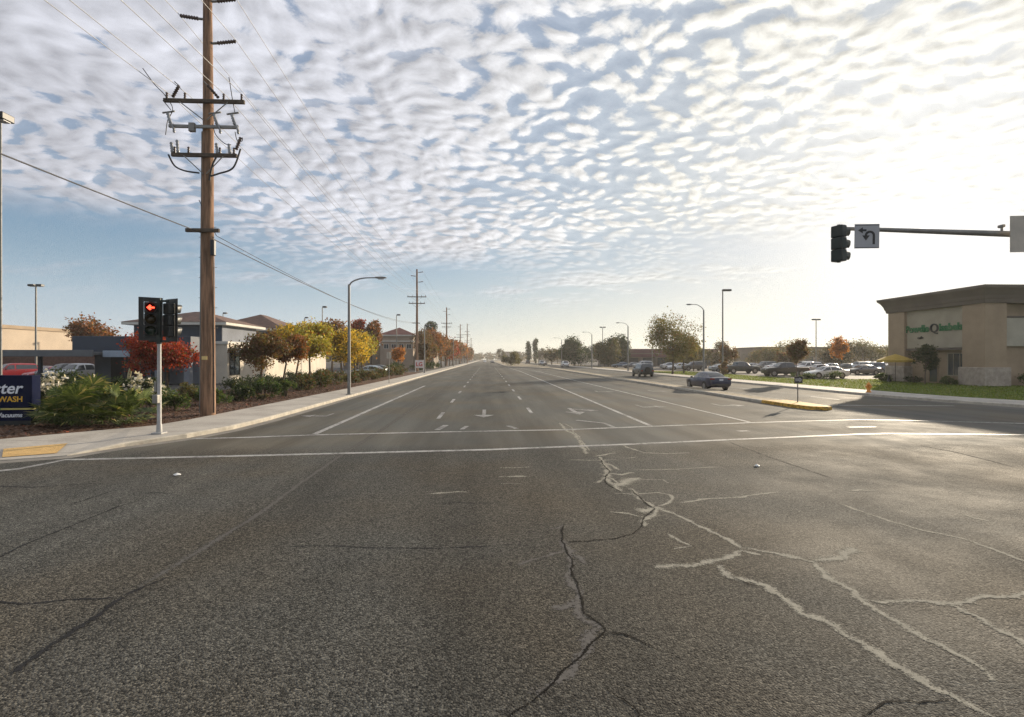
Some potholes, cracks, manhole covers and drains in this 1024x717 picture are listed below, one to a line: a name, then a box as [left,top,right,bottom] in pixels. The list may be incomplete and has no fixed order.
crack [0,483,175,556]
crack [508,423,1024,717]
